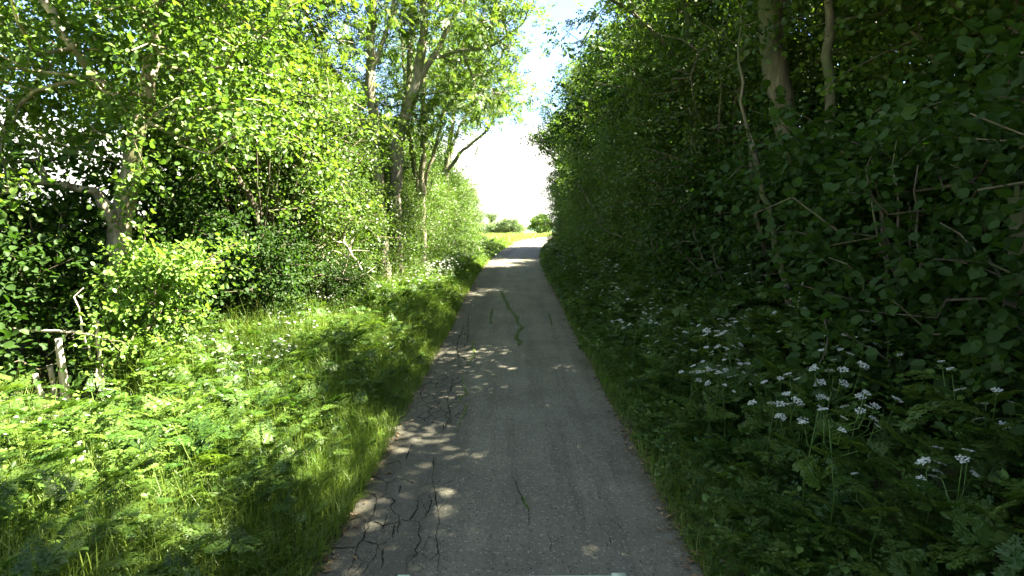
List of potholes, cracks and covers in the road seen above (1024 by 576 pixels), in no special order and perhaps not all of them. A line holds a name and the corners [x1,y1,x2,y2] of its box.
crack [488,291,524,345]
crack [511,476,552,552]
crack [319,315,476,574]
